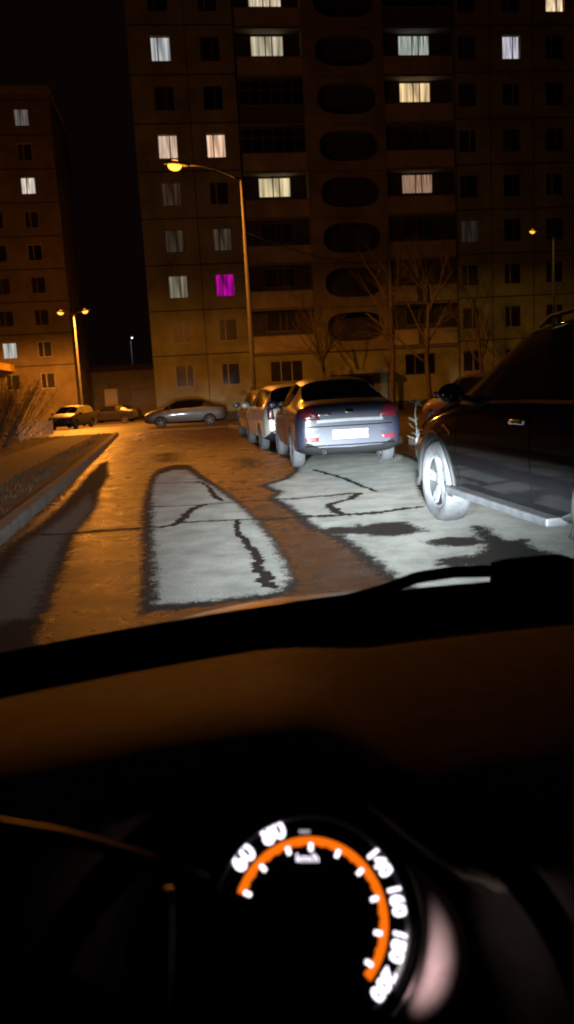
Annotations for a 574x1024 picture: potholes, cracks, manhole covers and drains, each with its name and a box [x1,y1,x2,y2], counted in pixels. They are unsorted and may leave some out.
crack [31,469,425,589]
